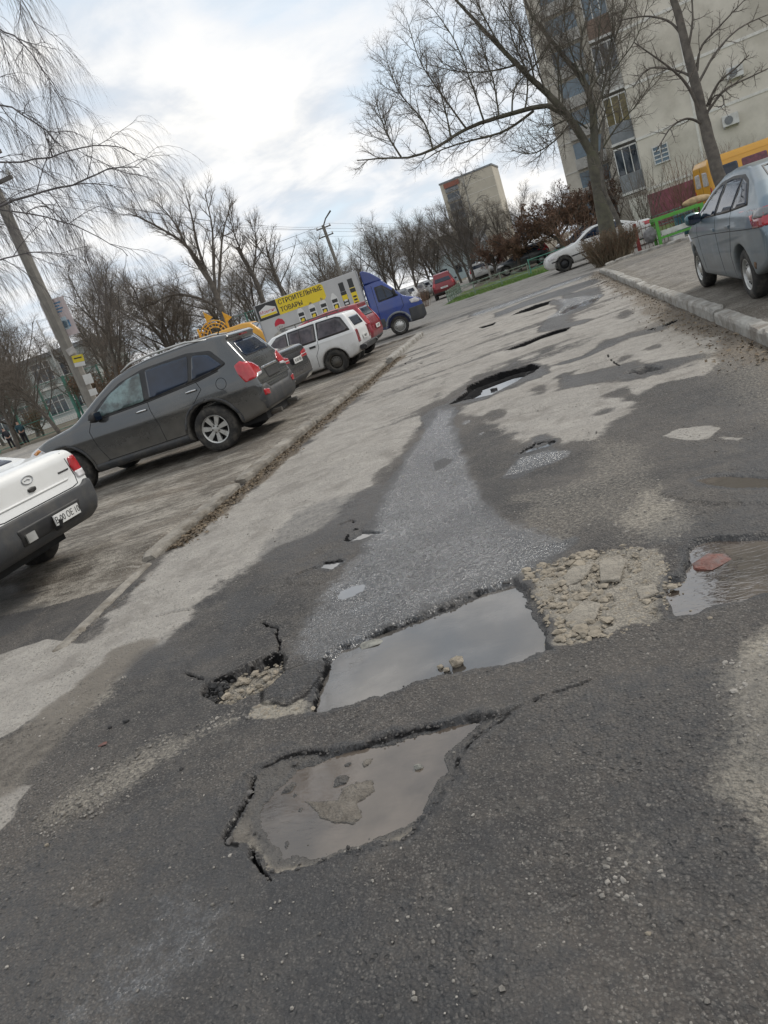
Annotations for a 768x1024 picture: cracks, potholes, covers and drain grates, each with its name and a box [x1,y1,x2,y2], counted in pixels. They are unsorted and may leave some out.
crack [261,620,282,652]
pothole [308,578,546,713]
pothole [199,651,289,705]
pothole [221,700,535,878]
pothole [511,301,551,316]
pothole [344,528,382,542]
pothole [448,363,541,405]
crack [534,680,590,702]
pothole [517,439,555,456]
pothole [658,532,768,617]
pothole [505,327,570,351]
